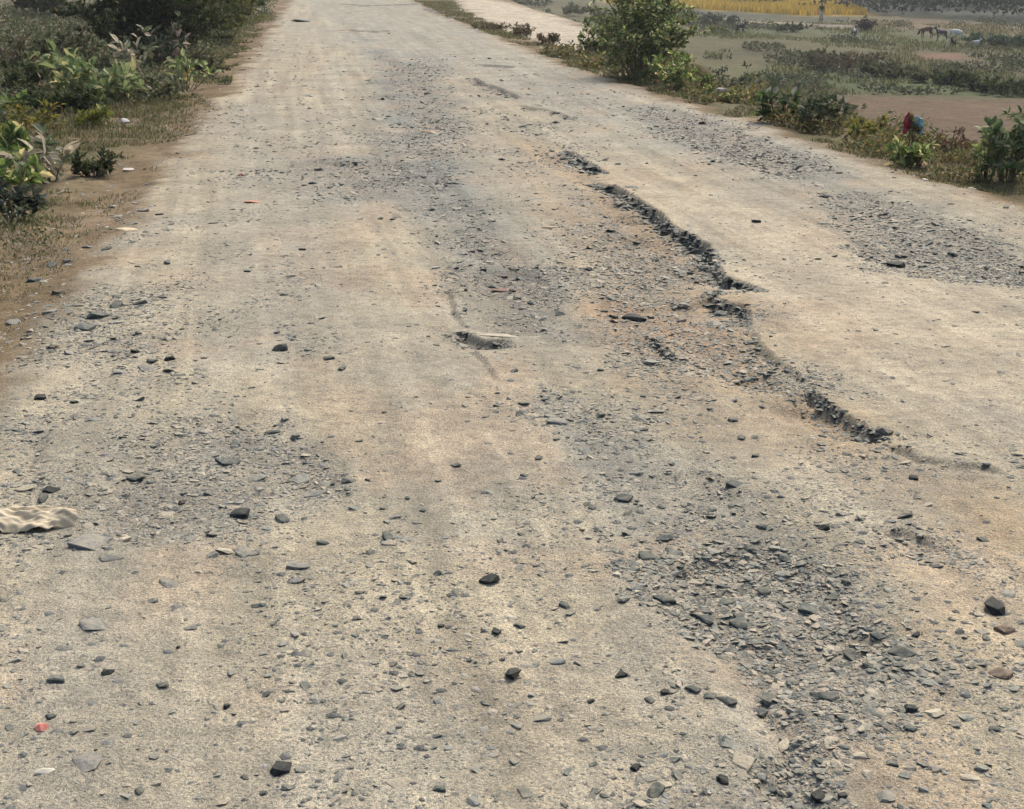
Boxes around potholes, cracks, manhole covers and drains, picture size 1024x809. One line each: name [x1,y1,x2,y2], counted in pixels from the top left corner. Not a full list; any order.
pothole [883,535,963,574]
pothole [648,103,822,181]
pothole [815,191,1024,286]
pothole [652,537,916,809]
pothole [561,160,878,446]
pothole [455,264,576,341]
